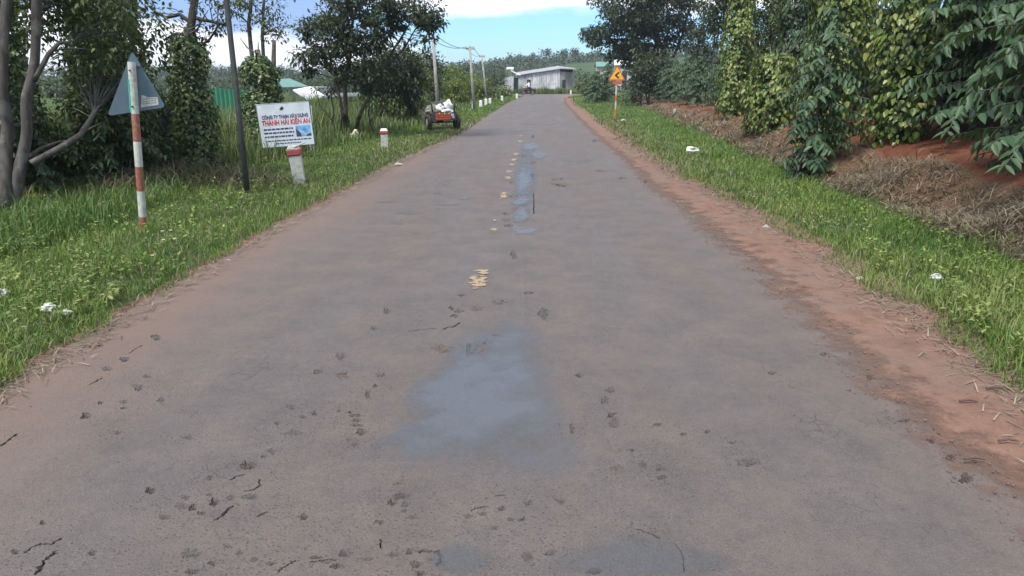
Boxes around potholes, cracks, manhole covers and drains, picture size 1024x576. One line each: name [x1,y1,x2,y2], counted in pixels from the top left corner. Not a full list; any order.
pothole [240,459,259,470]
crack [213,474,262,521]
pothole [537,307,551,321]
pothole [958,472,974,484]
pothole [735,458,764,467]
crack [23,538,62,575]
crack [636,529,685,572]
